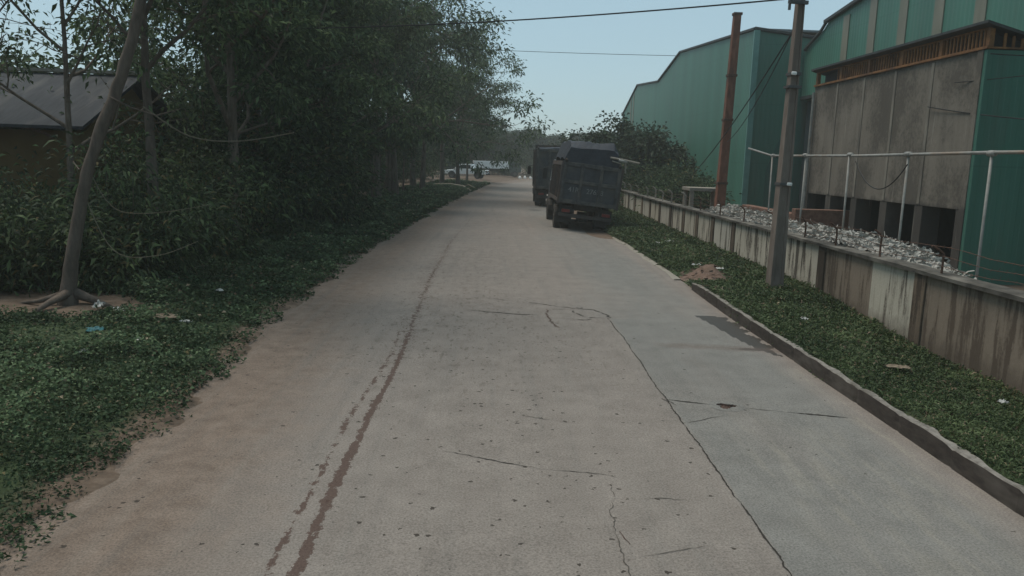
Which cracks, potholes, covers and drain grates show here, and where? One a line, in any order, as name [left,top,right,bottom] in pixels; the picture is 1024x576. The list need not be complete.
crack [474,299,839,576]
pothole [708,400,745,411]
